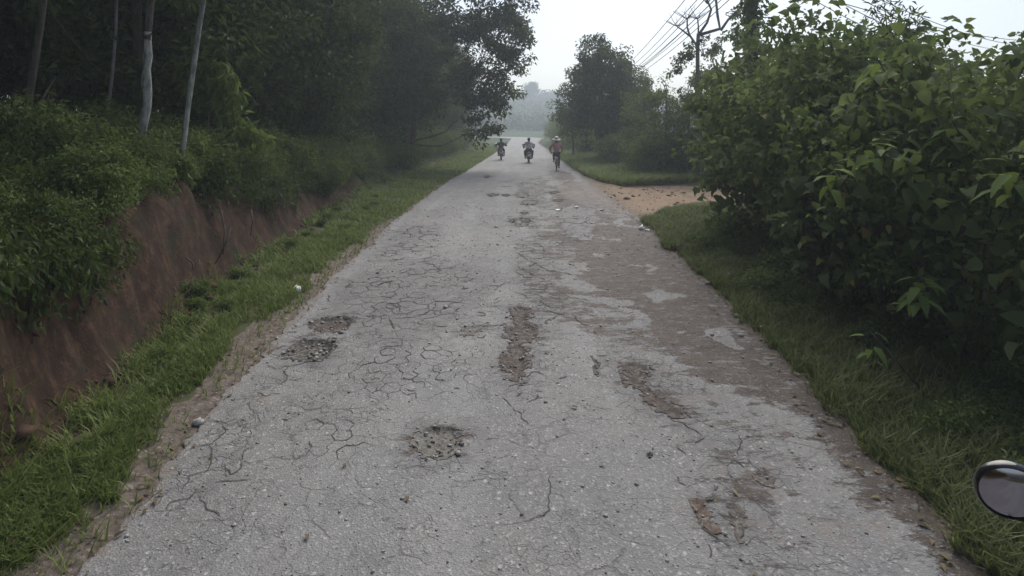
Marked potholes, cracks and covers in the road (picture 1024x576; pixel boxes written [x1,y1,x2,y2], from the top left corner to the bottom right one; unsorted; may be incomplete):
crack [530,471,554,520]
pothole [409,424,465,460]
pothole [281,336,340,361]
pothole [499,306,539,385]
pothole [308,315,355,333]
crack [137,331,390,516]
pothole [688,498,728,535]
pothole [617,362,691,418]
